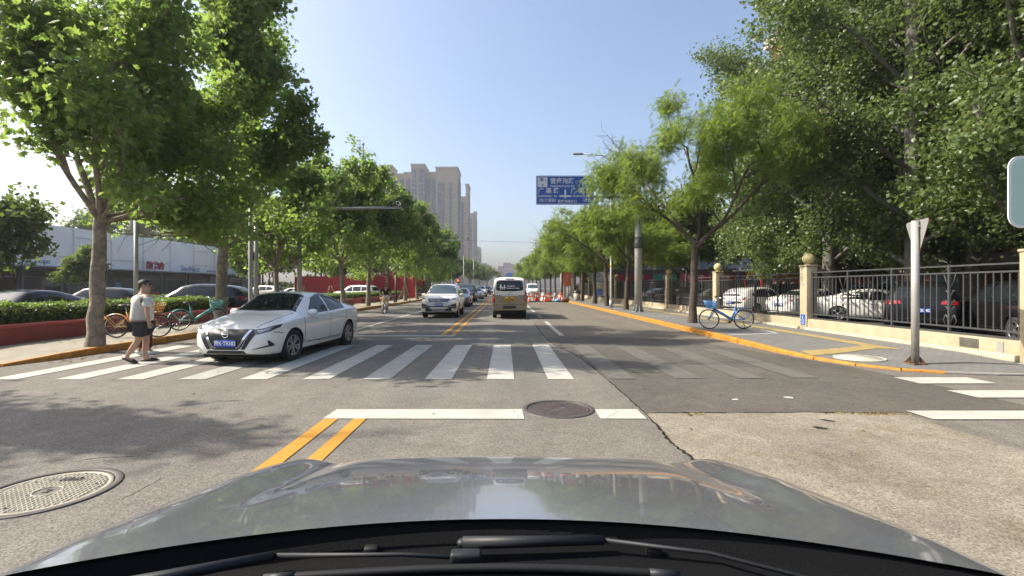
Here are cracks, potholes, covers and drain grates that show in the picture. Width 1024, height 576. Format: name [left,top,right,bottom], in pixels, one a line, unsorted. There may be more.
manhole cover [833,354,888,362]
manhole cover [523,400,595,419]
manhole cover [0,468,124,520]
